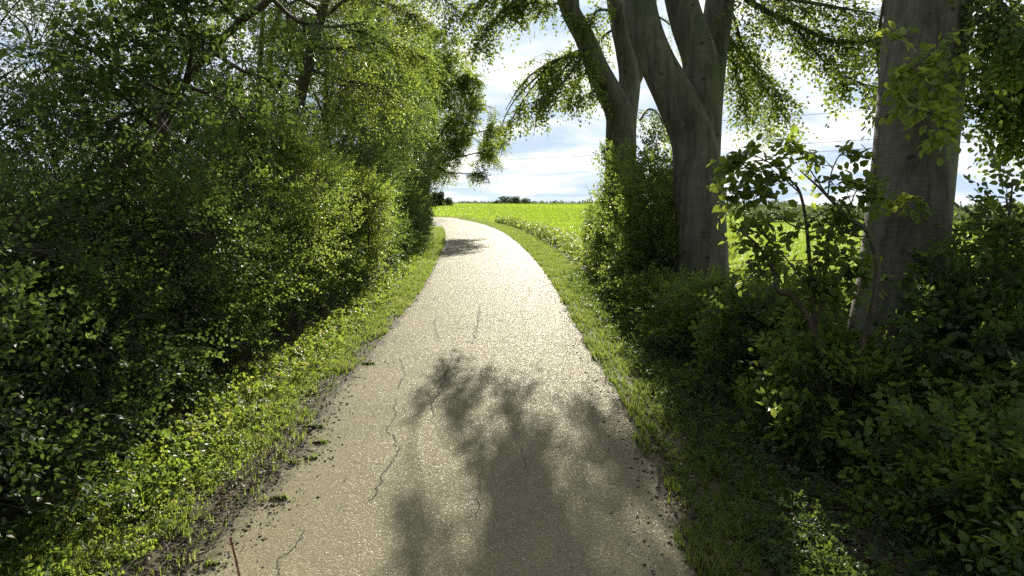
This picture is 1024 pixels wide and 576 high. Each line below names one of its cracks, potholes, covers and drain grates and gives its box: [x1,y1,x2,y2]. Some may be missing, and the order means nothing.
crack [366,357,405,503]
crack [277,528,305,576]
crack [431,296,481,417]
